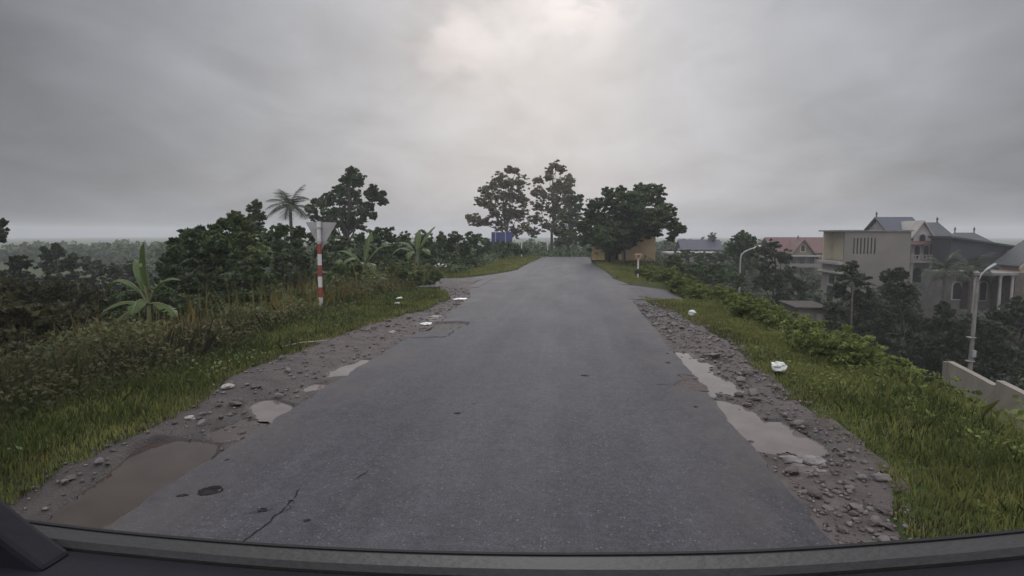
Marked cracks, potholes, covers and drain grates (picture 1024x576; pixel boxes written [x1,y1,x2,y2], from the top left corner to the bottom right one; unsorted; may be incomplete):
crack [243,488,300,541]
pothole [198,485,223,496]
